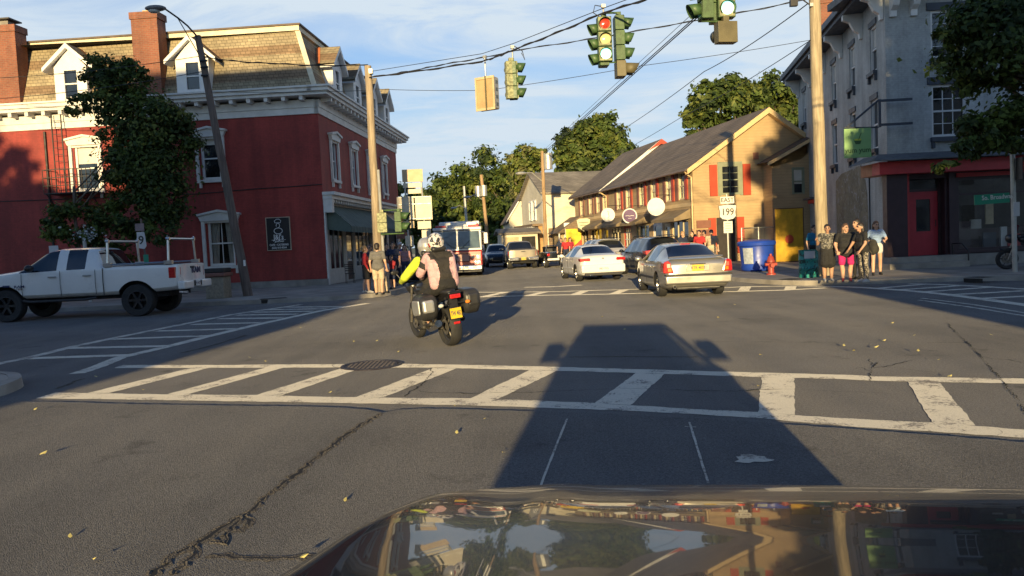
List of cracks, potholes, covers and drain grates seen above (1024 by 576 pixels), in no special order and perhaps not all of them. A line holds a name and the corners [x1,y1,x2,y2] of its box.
crack [144,413,385,576]
crack [948,323,1024,411]
manhole cover [340,360,403,371]
